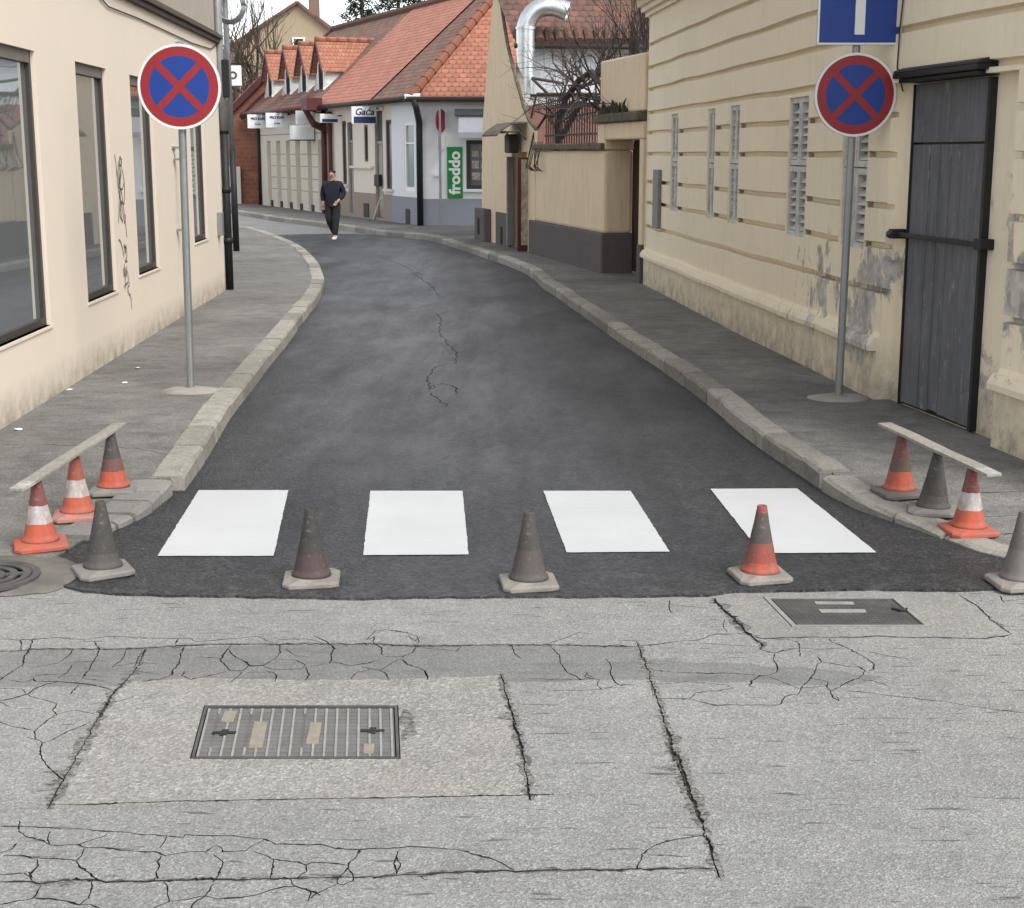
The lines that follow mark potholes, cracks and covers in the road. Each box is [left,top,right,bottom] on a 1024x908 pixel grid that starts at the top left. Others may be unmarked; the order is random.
crack [0,596,1024,908]
manhole cover [764,597,930,627]
